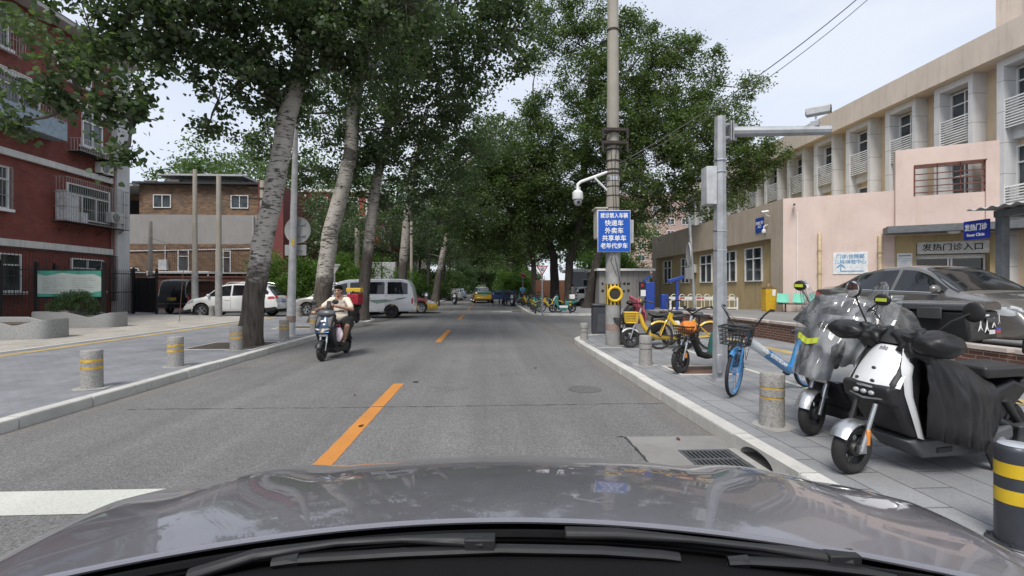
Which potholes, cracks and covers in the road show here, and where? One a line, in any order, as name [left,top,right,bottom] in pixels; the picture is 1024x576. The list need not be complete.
drain grate [626,436,770,471]
